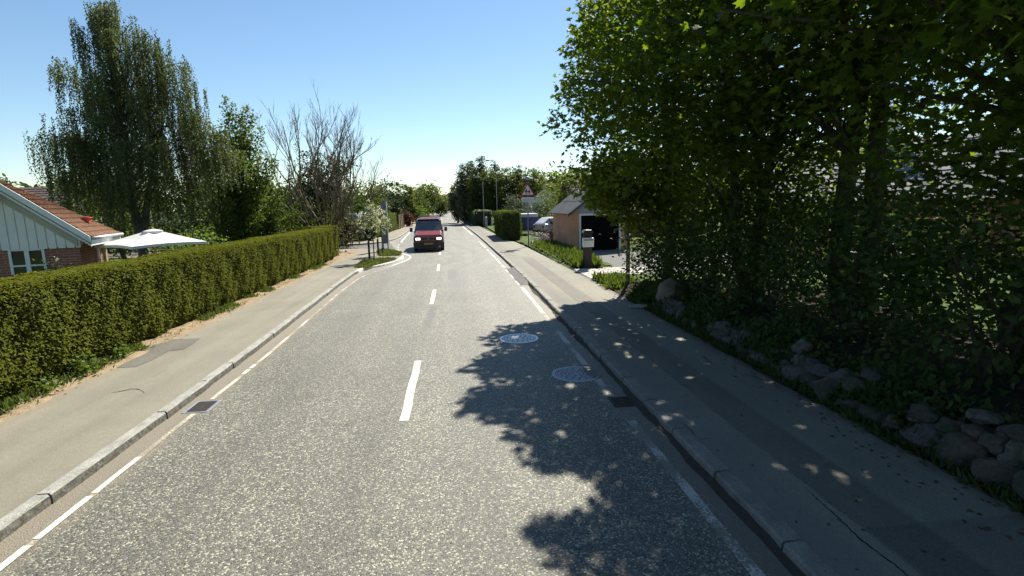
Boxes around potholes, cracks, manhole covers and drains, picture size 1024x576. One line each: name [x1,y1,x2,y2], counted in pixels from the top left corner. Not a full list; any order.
drain grate [181,400,221,414]
manhole cover [552,366,601,382]
manhole cover [500,334,538,344]
